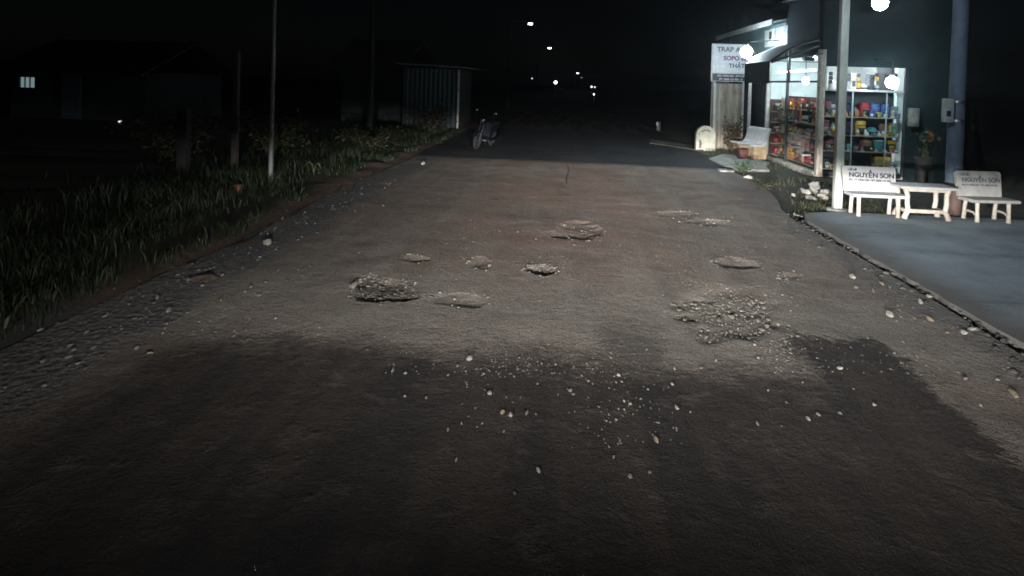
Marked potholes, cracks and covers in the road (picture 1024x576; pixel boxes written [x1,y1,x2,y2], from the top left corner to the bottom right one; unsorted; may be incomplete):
pothole [521,263,560,277]
pothole [710,256,763,271]
pothole [678,218,730,227]
pothole [348,272,421,305]
pothole [395,253,436,264]
pothole [549,220,606,241]
pothole [662,282,800,347]
pothole [651,210,699,218]
pothole [424,291,490,309]
pothole [466,255,492,271]
